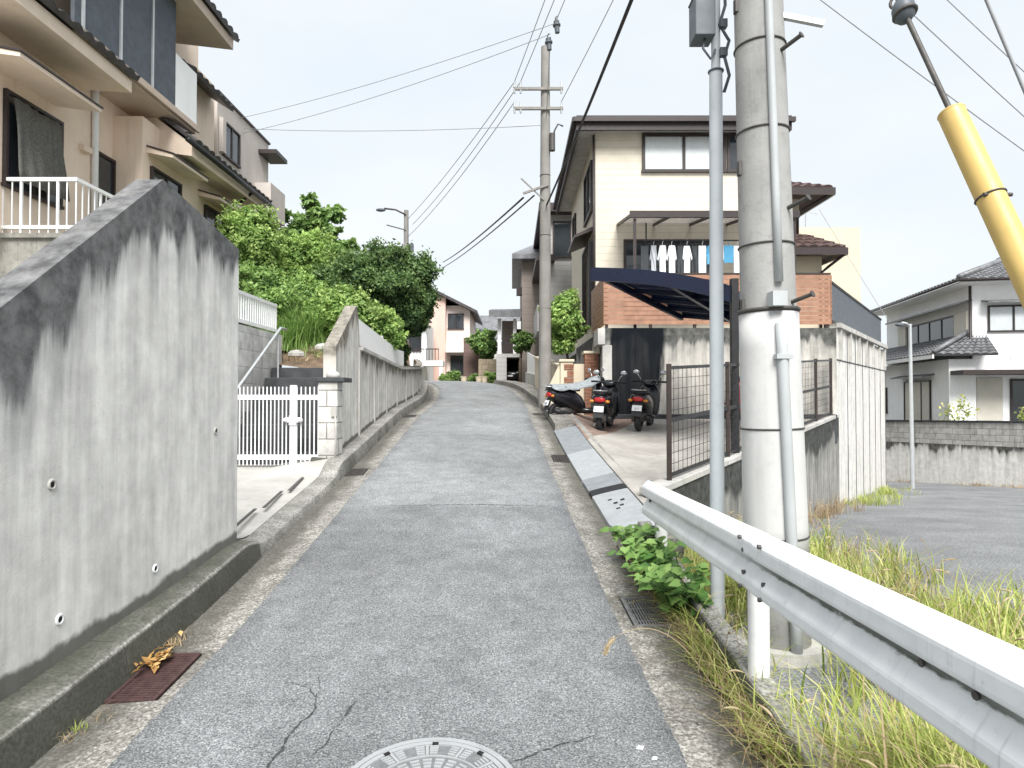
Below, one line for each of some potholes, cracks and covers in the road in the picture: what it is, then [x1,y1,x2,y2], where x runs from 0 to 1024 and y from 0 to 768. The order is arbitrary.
manhole cover [351,737,513,768]
drain grate [345,468,368,476]
drain grate [551,455,570,463]
drain grate [103,653,201,705]
crack [509,735,593,763]
drain grate [620,597,674,627]
crack [267,672,355,768]
